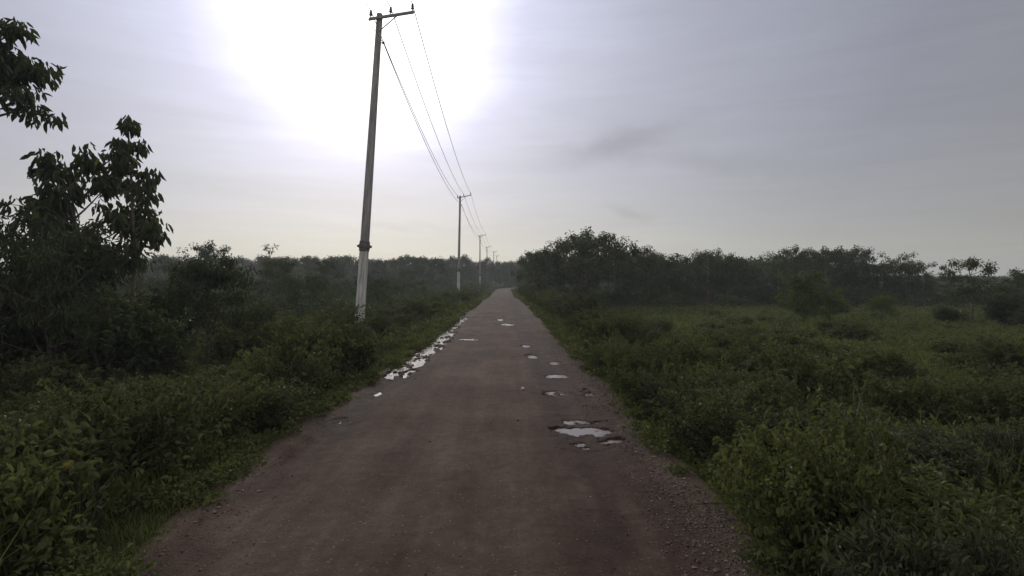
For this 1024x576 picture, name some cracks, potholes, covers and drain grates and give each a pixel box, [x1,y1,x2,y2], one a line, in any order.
pothole [528,388,586,399]
pothole [533,416,638,455]
pothole [376,317,473,382]
pothole [533,372,578,381]
pothole [553,386,604,398]
